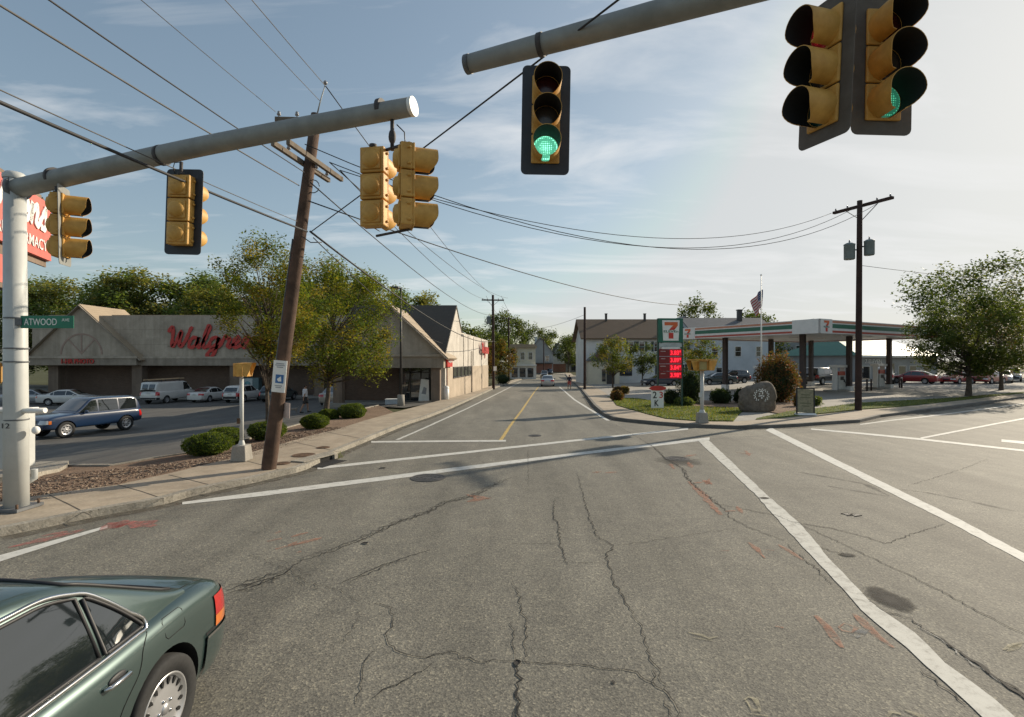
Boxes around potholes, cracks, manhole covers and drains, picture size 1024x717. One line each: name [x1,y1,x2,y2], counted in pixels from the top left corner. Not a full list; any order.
manhole cover [411,474,446,482]
crack [343,475,680,717]
crack [229,477,512,593]
crack [620,427,1024,705]
